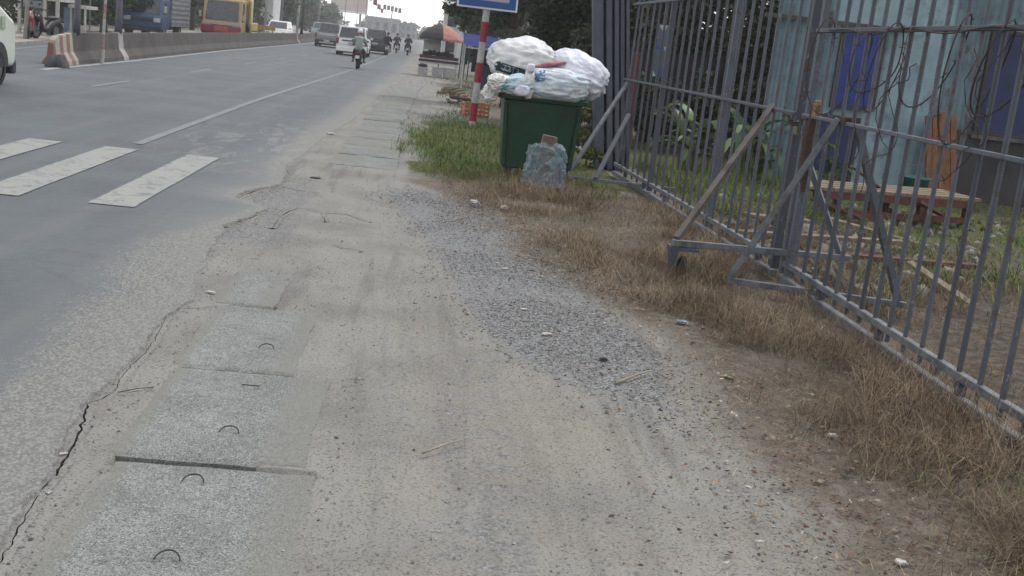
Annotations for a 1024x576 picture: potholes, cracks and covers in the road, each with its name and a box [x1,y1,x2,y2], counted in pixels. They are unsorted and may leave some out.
crack [0,301,215,576]
crack [225,187,370,252]
